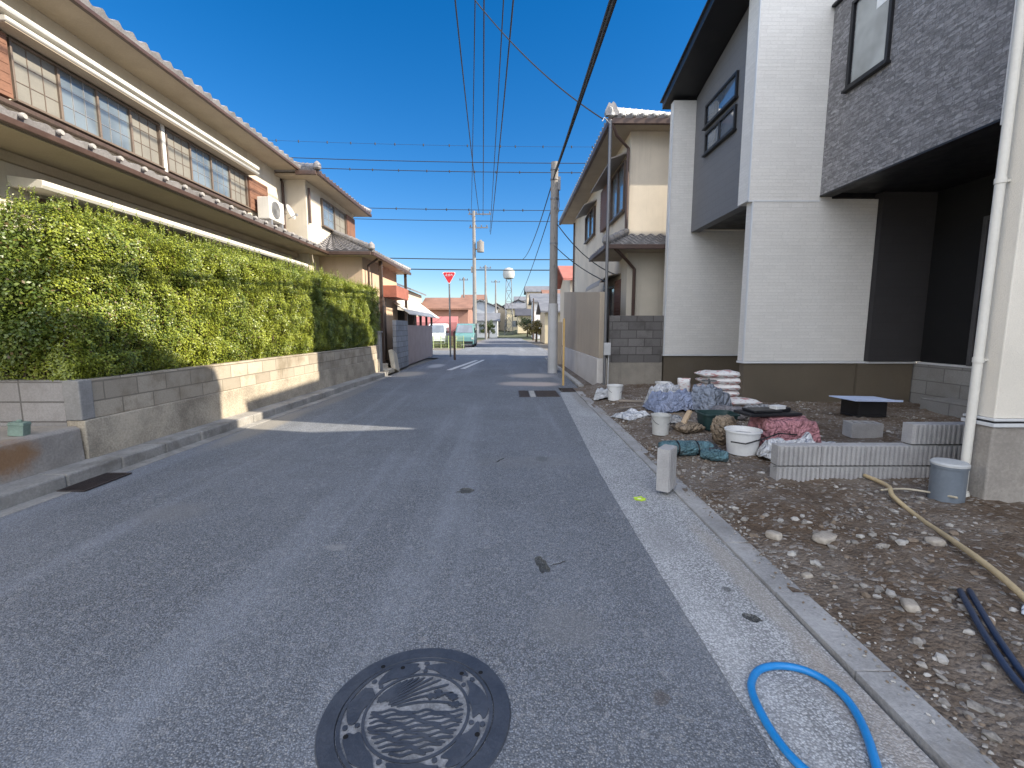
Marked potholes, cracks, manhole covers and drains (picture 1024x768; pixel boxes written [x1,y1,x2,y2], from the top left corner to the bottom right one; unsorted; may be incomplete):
pothole [742,613,762,623]
drain grate [56,472,132,492]
pothole [535,556,550,573]
manhole cover [314,648,511,768]
